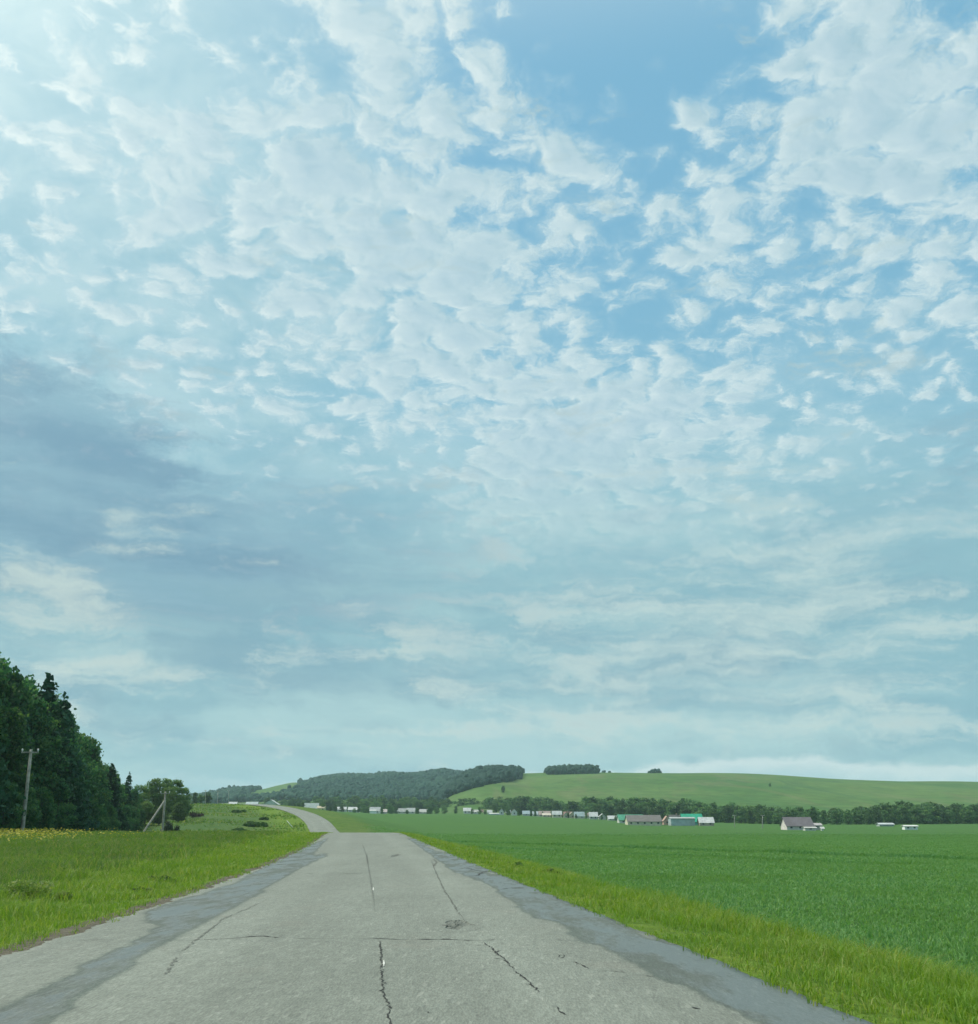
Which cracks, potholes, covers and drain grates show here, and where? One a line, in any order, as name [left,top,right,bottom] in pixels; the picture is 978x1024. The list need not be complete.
crack [97,859,622,1024]
